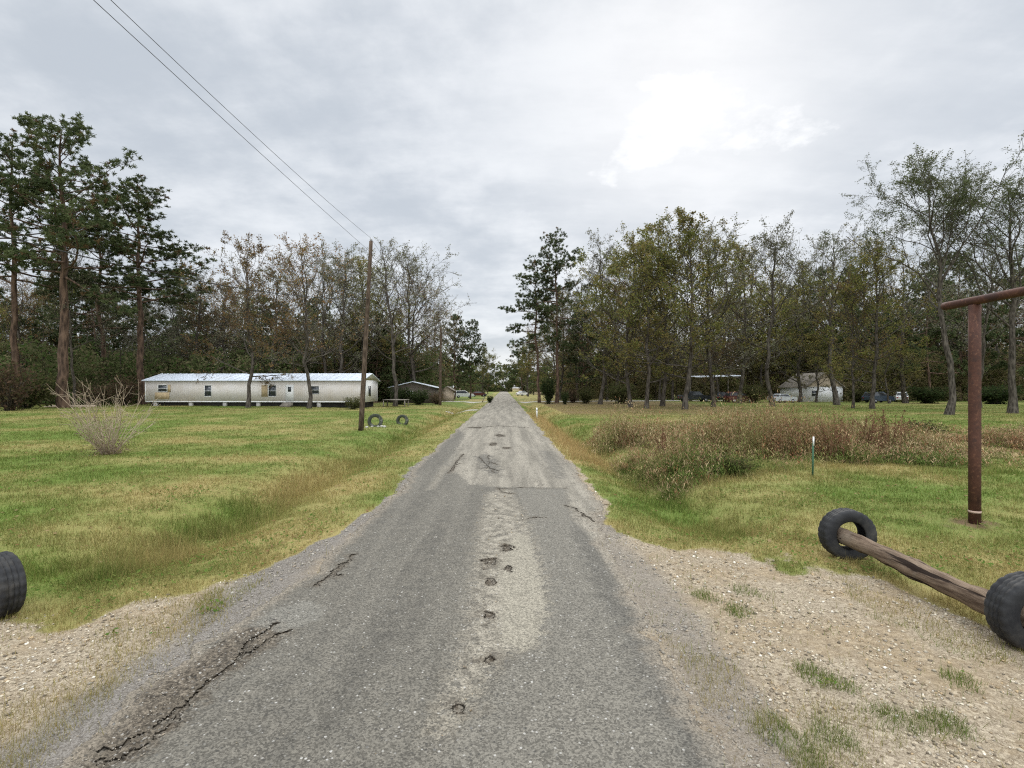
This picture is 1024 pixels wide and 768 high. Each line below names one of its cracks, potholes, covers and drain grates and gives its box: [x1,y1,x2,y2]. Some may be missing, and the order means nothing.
crack [447,454,499,473]
pothole [450,703,466,714]
pothole [479,556,499,565]
crack [313,553,358,587]
crack [94,622,293,766]
